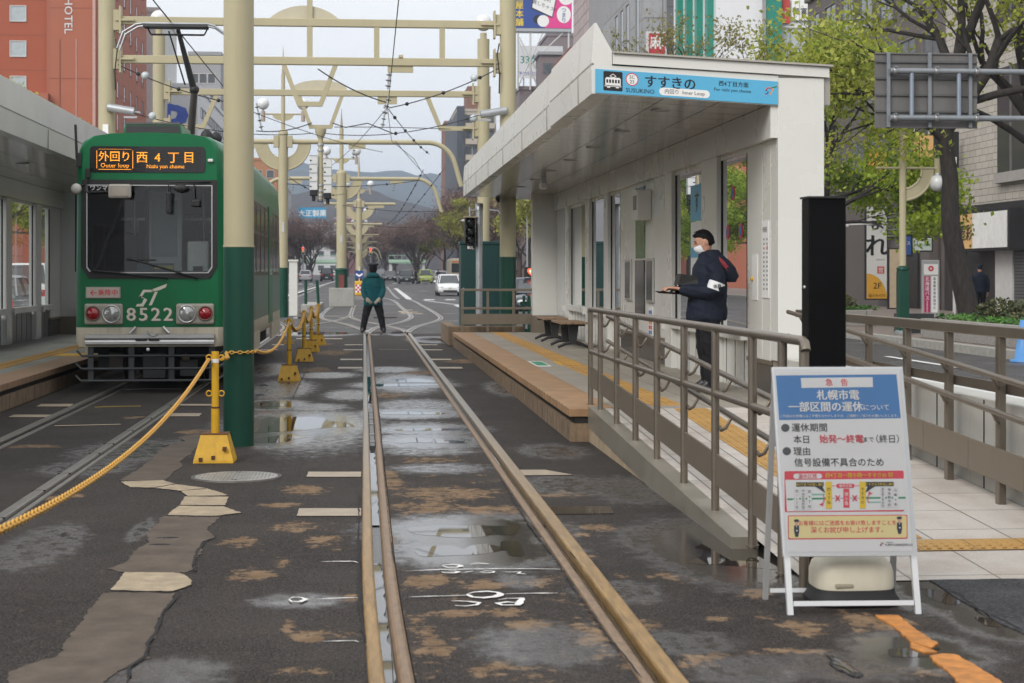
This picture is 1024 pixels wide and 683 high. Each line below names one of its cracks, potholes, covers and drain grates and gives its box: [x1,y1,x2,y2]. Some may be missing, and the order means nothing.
crack [189,537,216,573]
crack [126,595,179,683]
manhole cover [191,471,282,483]
